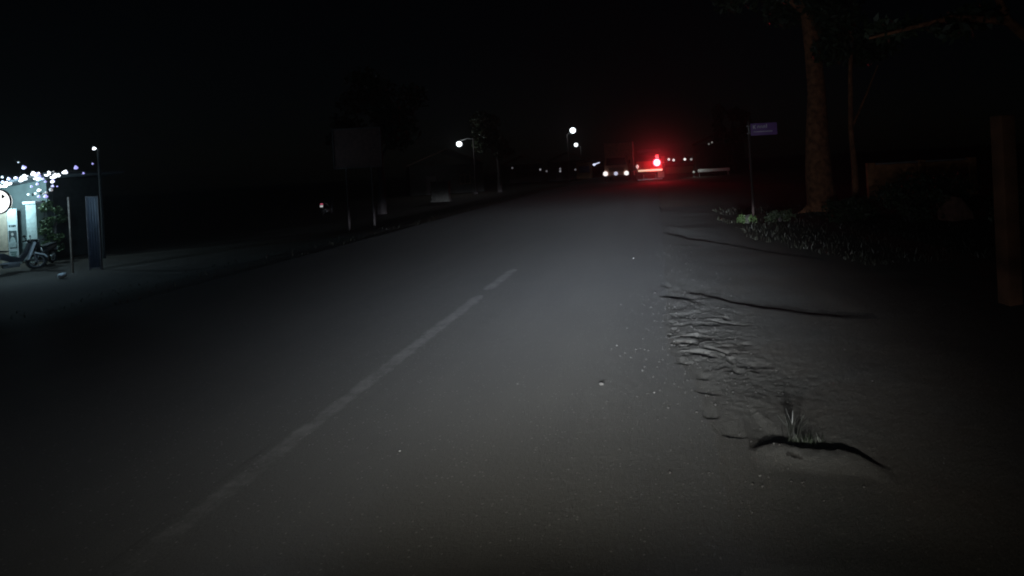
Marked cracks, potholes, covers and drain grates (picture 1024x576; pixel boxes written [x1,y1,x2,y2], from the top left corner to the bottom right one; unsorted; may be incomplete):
crack [659,286,879,347]
